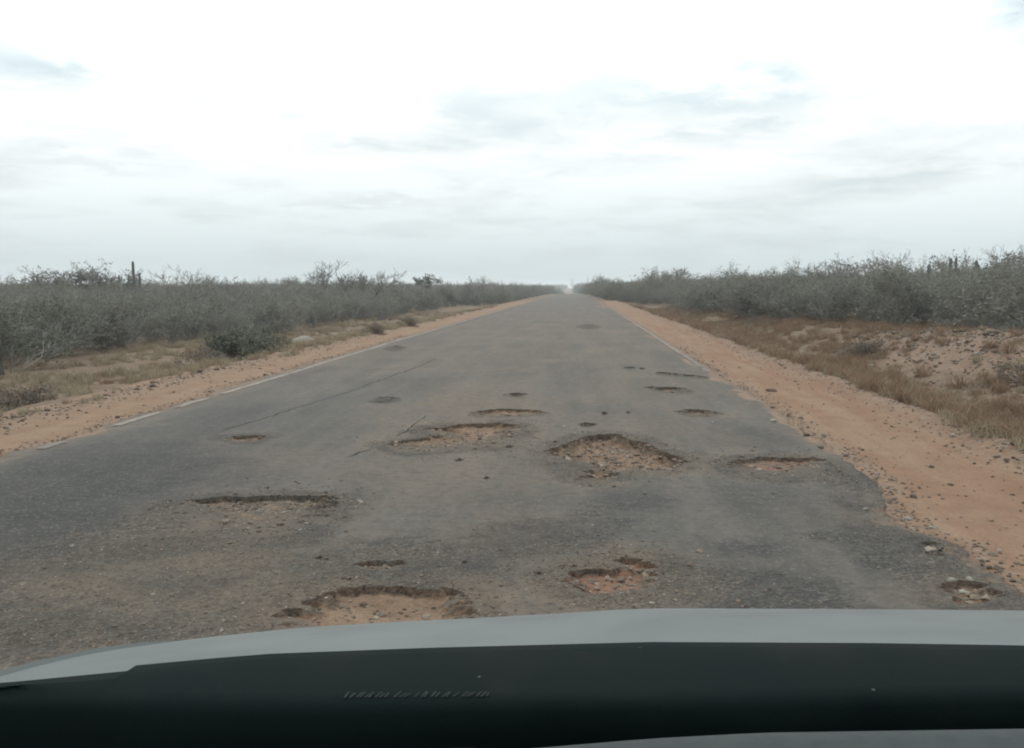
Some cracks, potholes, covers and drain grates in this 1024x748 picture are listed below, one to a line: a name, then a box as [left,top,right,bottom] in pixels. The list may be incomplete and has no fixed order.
pothole [354,560,407,572]
pothole [546,434,691,482]
pothole [673,409,727,417]
pothole [384,422,523,454]
pothole [468,409,549,418]
pothole [561,557,660,596]
pothole [643,386,695,395]
pothole [270,585,479,630]
